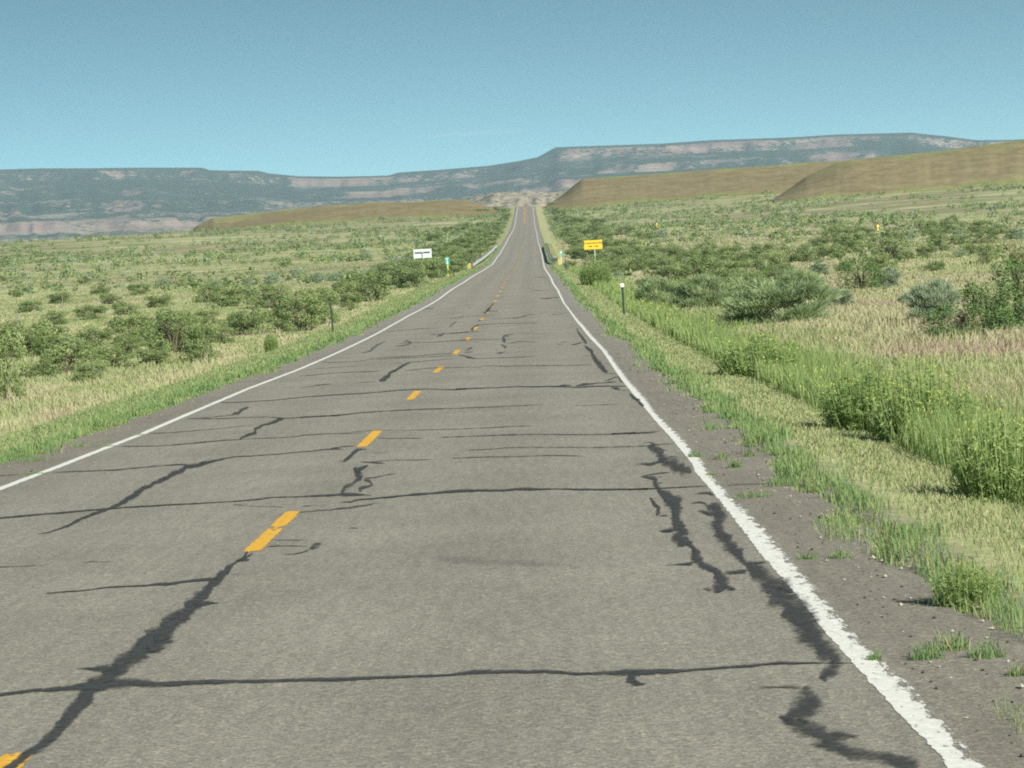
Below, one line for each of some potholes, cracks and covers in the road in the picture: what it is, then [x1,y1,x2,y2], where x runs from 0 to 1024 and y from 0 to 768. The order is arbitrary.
crack [49,561,218,593]
crack [1,315,670,476]
crack [0,486,696,518]
